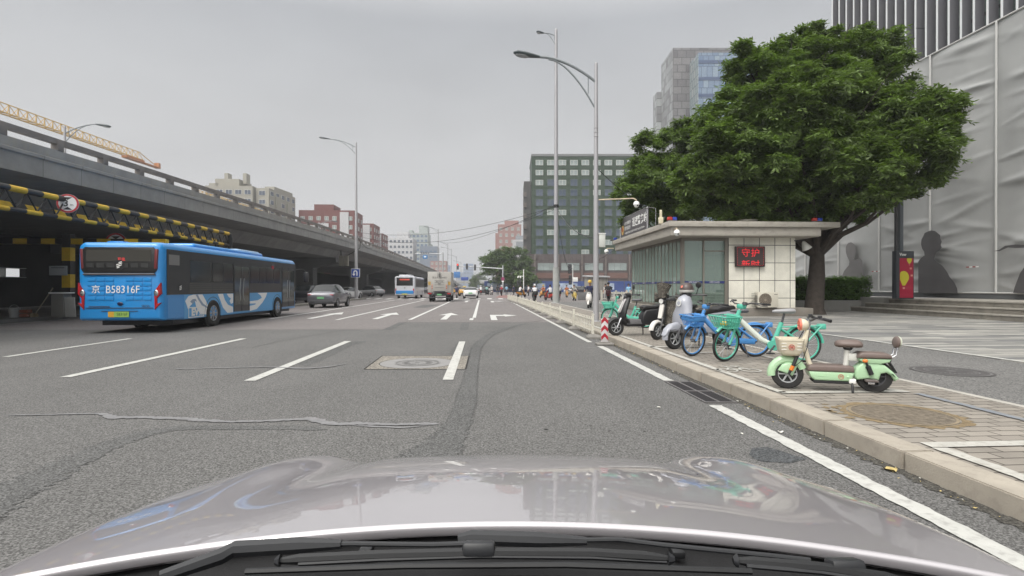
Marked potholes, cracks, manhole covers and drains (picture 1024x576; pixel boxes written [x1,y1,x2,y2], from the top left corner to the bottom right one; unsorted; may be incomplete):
drain grate [665,381,737,403]
manhole cover [822,402,976,429]
manhole cover [909,366,997,377]
manhole cover [364,356,470,369]
